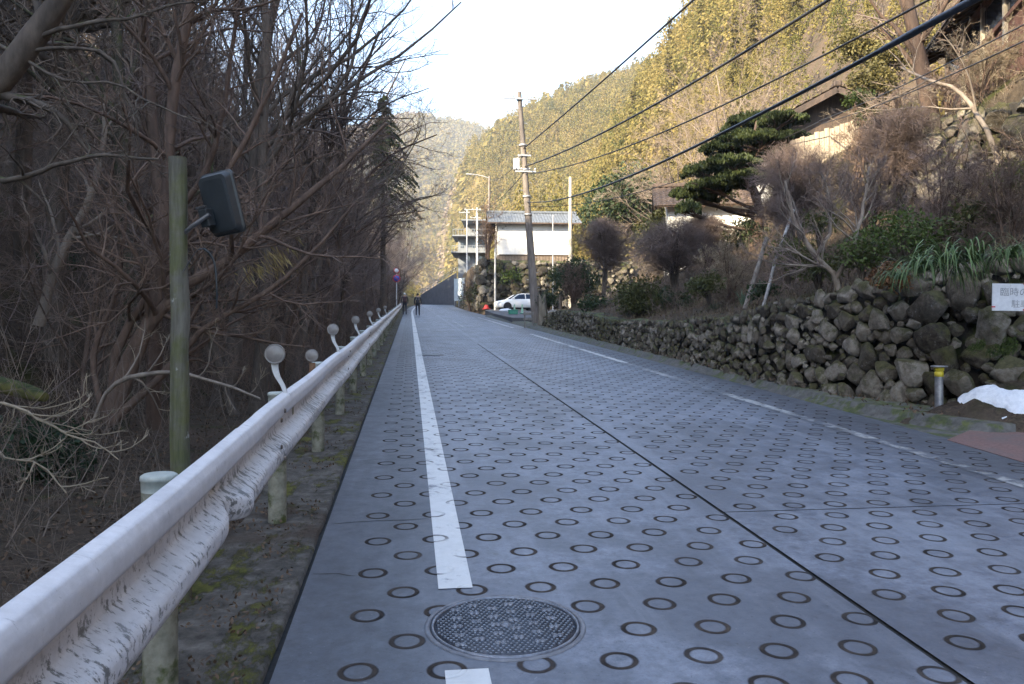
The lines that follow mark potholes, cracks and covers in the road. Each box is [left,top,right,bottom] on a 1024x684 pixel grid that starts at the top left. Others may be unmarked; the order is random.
manhole cover [425,595,586,662]
